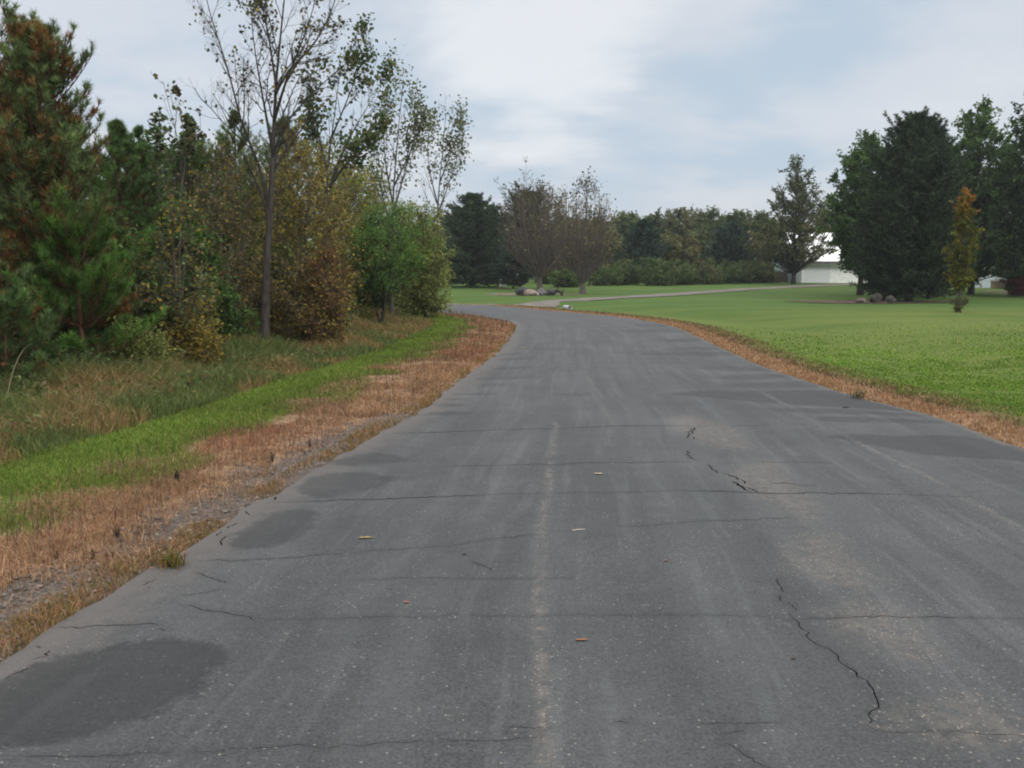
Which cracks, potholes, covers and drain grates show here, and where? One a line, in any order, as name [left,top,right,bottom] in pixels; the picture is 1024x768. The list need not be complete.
crack [395,425,764,434]
crack [184,511,784,620]
crack [273,578,1021,736]
crack [273,427,955,503]
